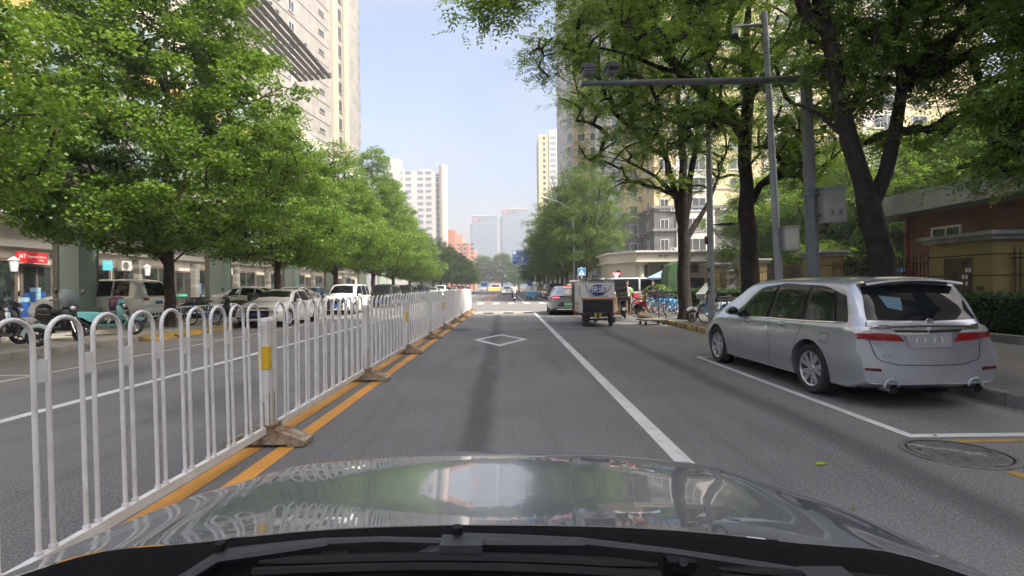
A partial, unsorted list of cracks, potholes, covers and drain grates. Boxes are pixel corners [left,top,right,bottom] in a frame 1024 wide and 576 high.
manhole cover [898,439,1024,471]
